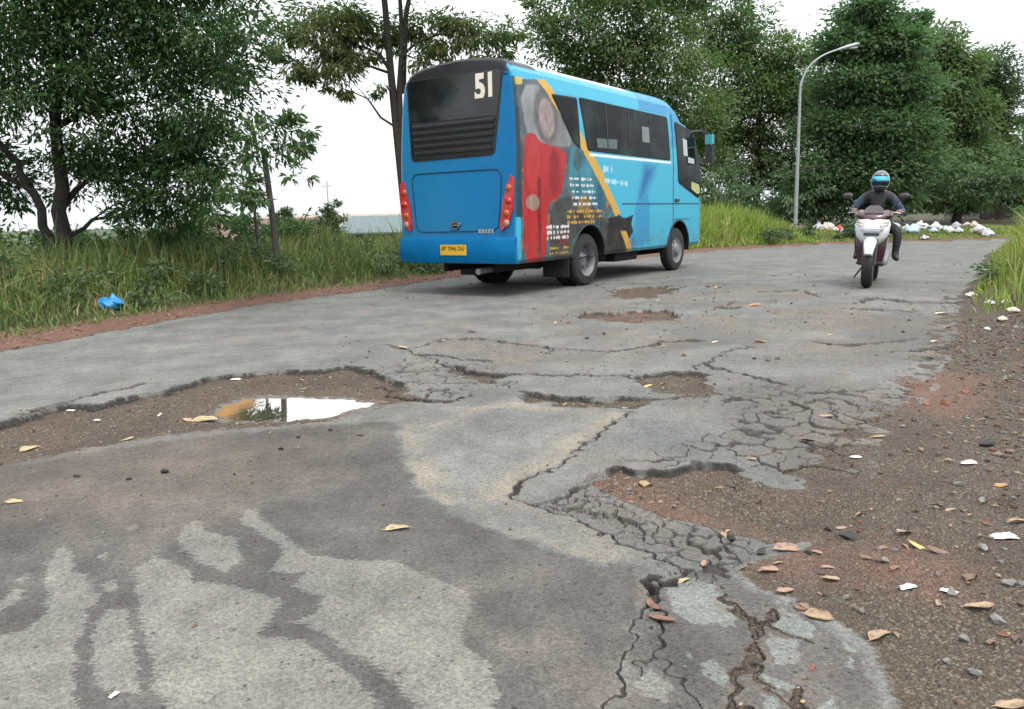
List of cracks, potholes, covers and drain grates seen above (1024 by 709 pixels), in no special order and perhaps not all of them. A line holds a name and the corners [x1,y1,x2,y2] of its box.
crack [758,289,820,297]
crack [374,337,926,709]
crack [813,337,955,353]
pothole [445,365,514,384]
pothole [583,460,916,549]
crack [703,301,741,313]
pothole [572,308,683,324]
pothole [0,365,447,474]
crack [839,297,974,313]
pothole [517,390,654,410]
pothole [603,285,683,300]
pothole [635,370,727,398]
